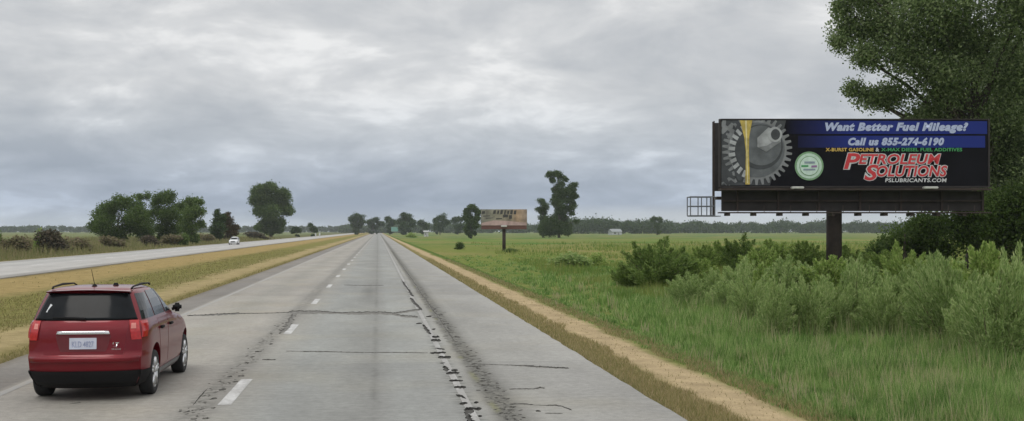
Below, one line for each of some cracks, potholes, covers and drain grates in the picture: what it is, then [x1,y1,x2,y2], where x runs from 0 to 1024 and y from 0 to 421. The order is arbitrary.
crack [510,387,571,414]
crack [187,309,421,333]
